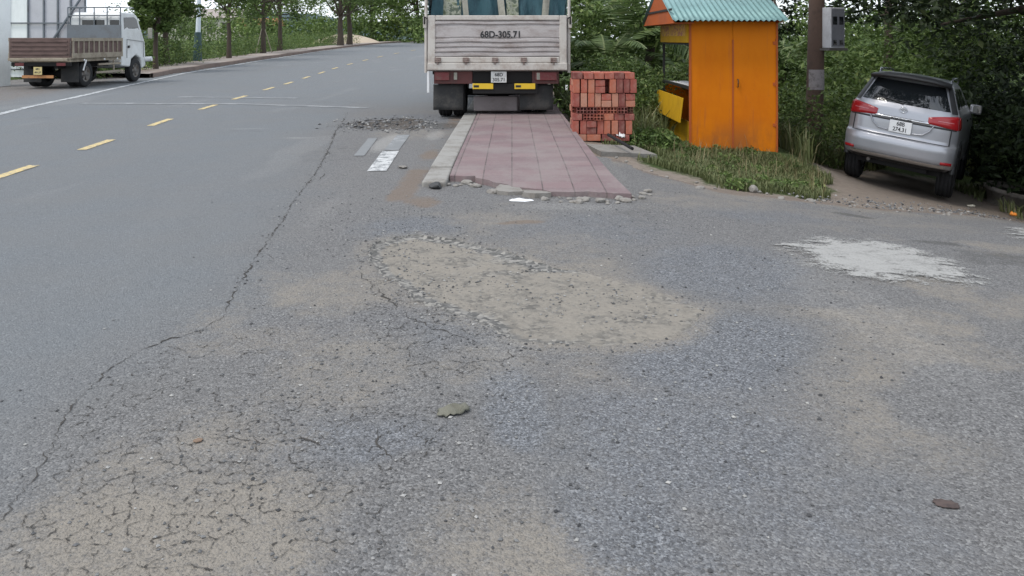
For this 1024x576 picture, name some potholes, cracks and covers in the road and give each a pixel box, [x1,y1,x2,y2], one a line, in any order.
crack [225,113,348,313]
crack [1,315,457,576]
pothole [368,234,705,347]
